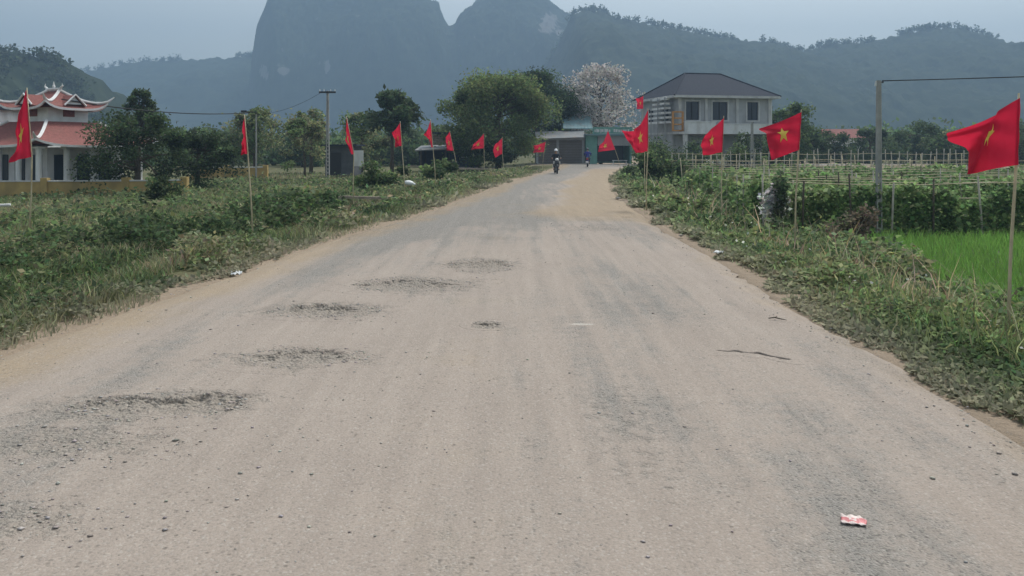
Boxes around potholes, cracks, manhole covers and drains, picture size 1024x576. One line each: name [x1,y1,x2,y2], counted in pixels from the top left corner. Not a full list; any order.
pothole [9,386,298,430]
pothole [319,275,505,296]
pothole [430,255,532,278]
pothole [237,301,413,322]
crack [696,346,814,365]
pothole [459,319,517,331]
pothole [198,343,404,374]
